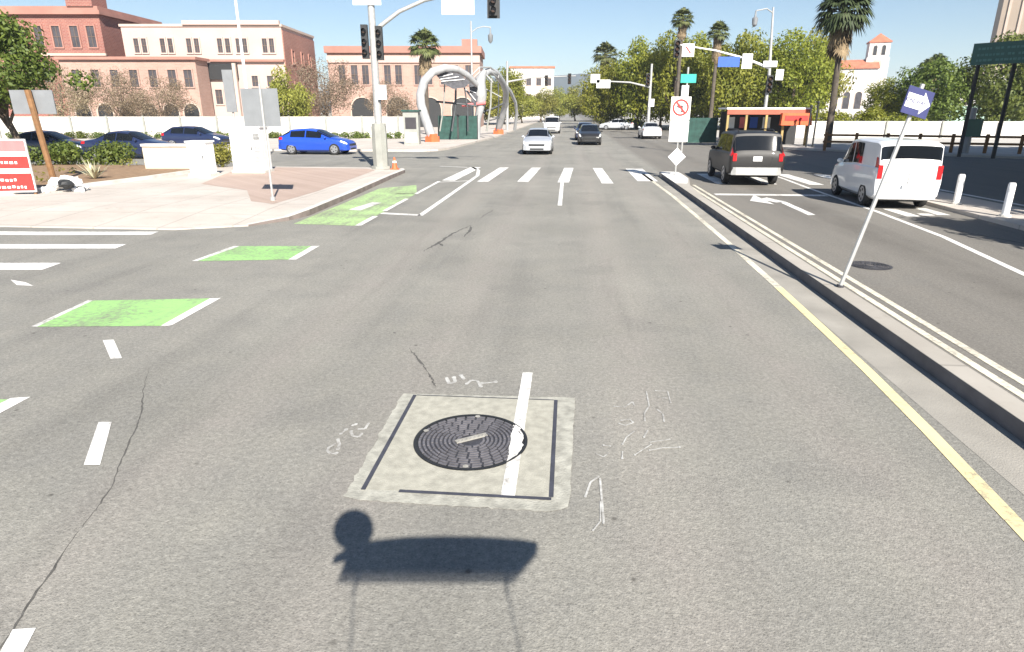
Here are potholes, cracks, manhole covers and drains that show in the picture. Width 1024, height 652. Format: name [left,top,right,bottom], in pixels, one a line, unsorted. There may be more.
crack [424,211,492,251]
manhole cover [413,414,528,471]
manhole cover [851,261,893,270]
crack [393,332,436,386]
crack [0,371,149,648]
